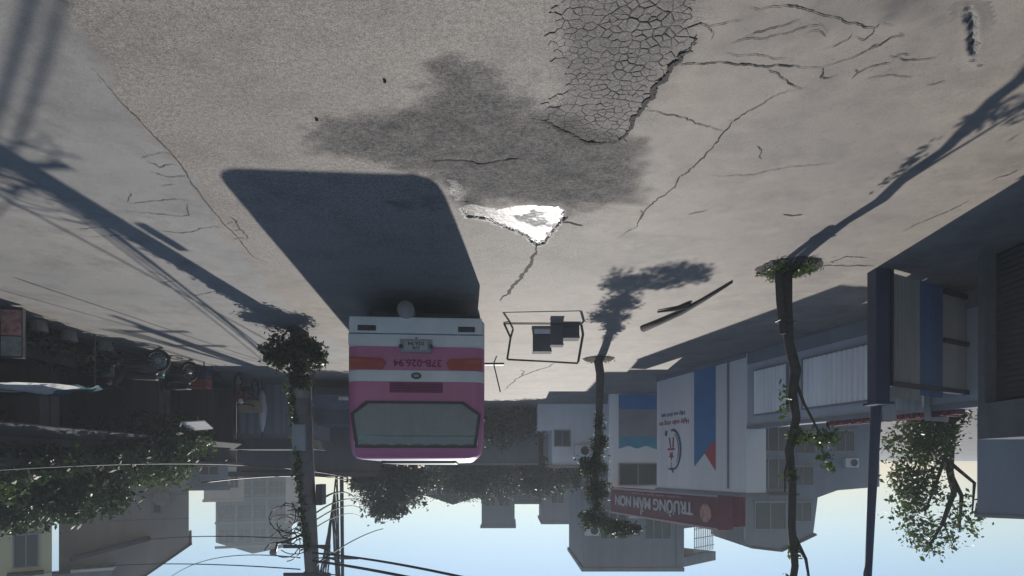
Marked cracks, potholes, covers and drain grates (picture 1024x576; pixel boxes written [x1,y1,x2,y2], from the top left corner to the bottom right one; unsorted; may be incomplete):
pothole [452,200,572,250]
crack [531,0,945,238]
crack [128,153,222,234]
